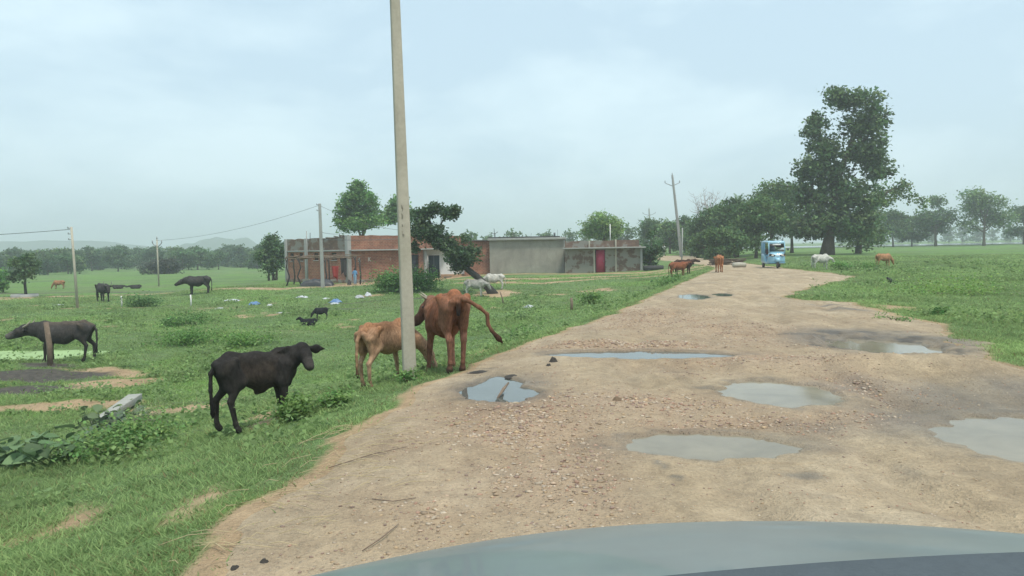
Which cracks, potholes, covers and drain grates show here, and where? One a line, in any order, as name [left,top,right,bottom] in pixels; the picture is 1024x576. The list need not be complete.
pothole [777,327,1002,356]
pothole [438,369,557,409]
pothole [671,293,717,301]
pothole [869,409,1024,479]
pothole [684,373,877,416]
pothole [581,426,841,468]
pothole [493,347,785,363]
